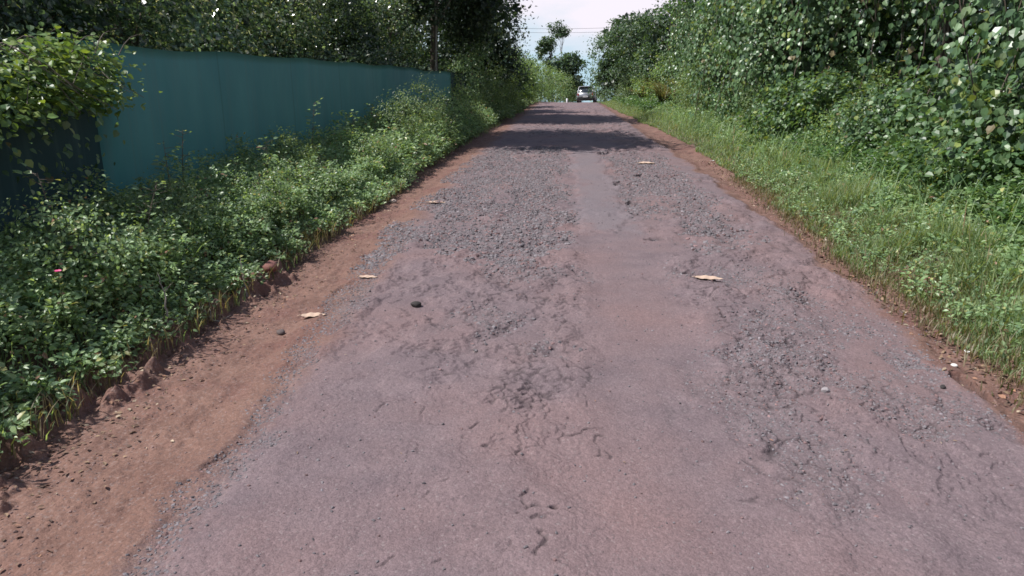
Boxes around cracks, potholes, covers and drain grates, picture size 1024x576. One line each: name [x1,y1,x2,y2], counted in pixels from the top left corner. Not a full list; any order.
crack [491,486,584,564]
crack [690,268,1012,503]
crack [341,249,641,467]
